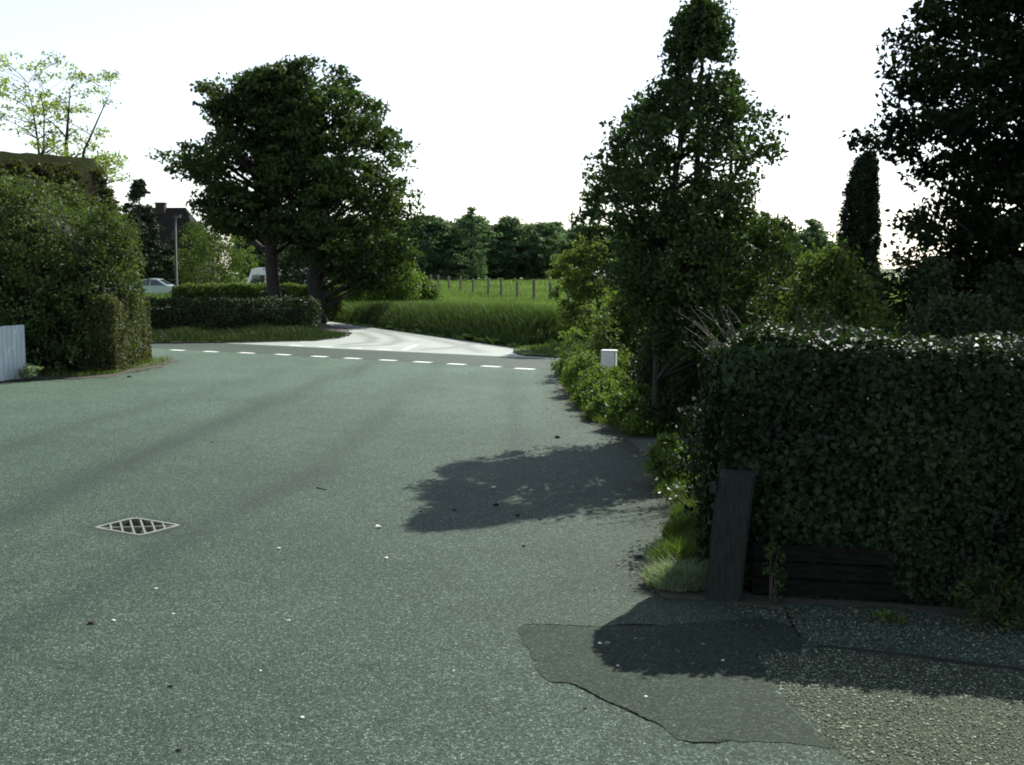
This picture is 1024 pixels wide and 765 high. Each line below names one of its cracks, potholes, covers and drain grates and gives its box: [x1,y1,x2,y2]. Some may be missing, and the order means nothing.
drain grate [95,517,180,536]
